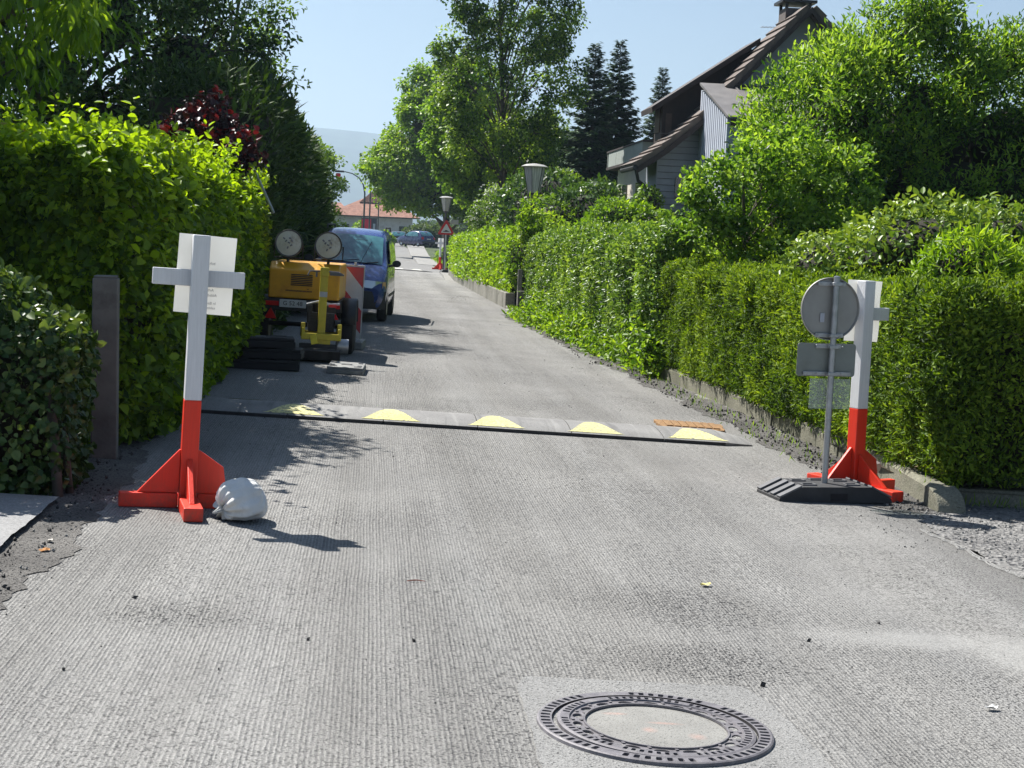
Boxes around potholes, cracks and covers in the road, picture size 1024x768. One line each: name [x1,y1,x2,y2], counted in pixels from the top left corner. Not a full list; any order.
manhole cover [536,692,774,767]
